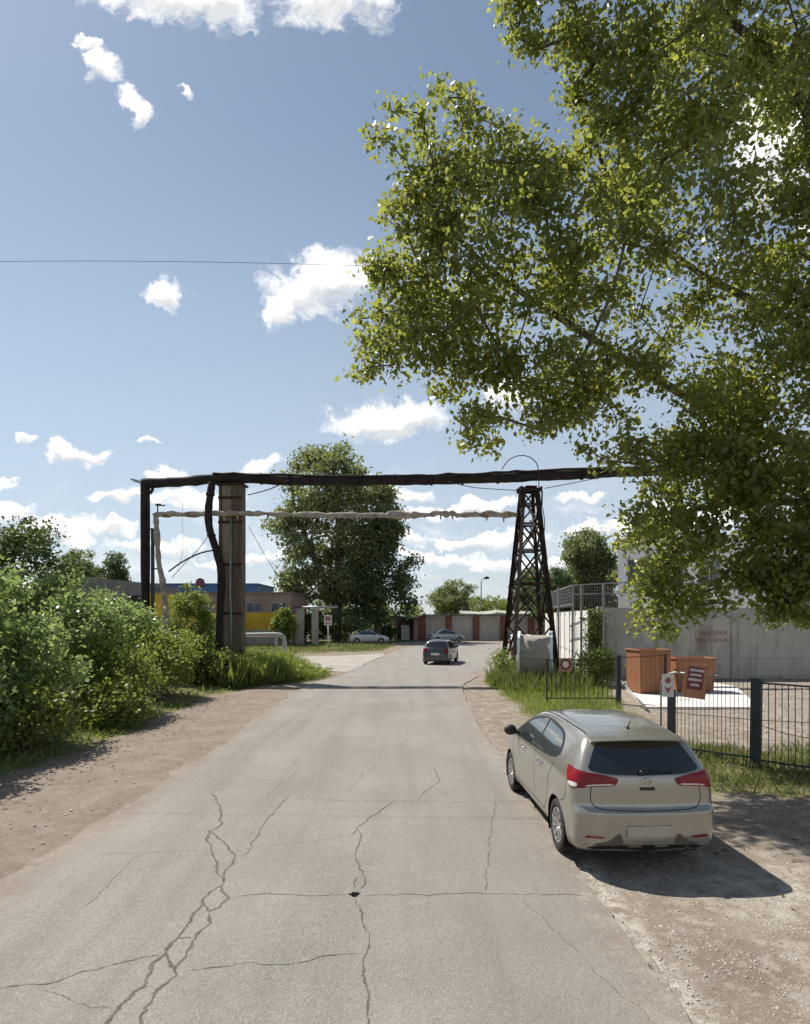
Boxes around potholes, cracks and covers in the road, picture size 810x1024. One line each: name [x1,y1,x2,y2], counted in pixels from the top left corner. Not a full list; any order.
crack [1,764,654,1024]
